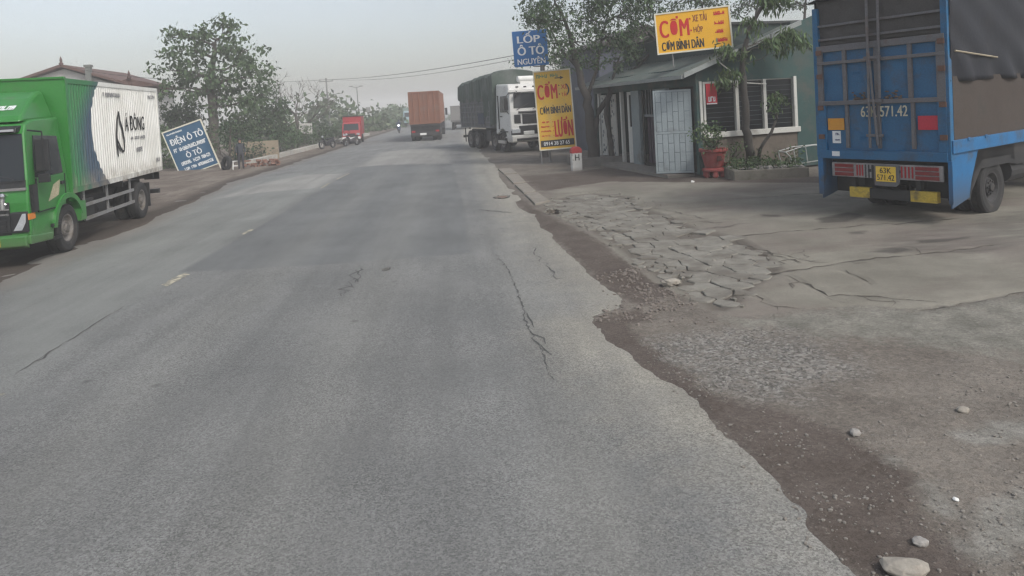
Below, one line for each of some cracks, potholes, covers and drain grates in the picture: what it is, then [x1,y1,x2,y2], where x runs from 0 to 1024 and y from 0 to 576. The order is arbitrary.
crack [656,193,935,303]
crack [497,255,554,380]
crack [339,268,364,296]
